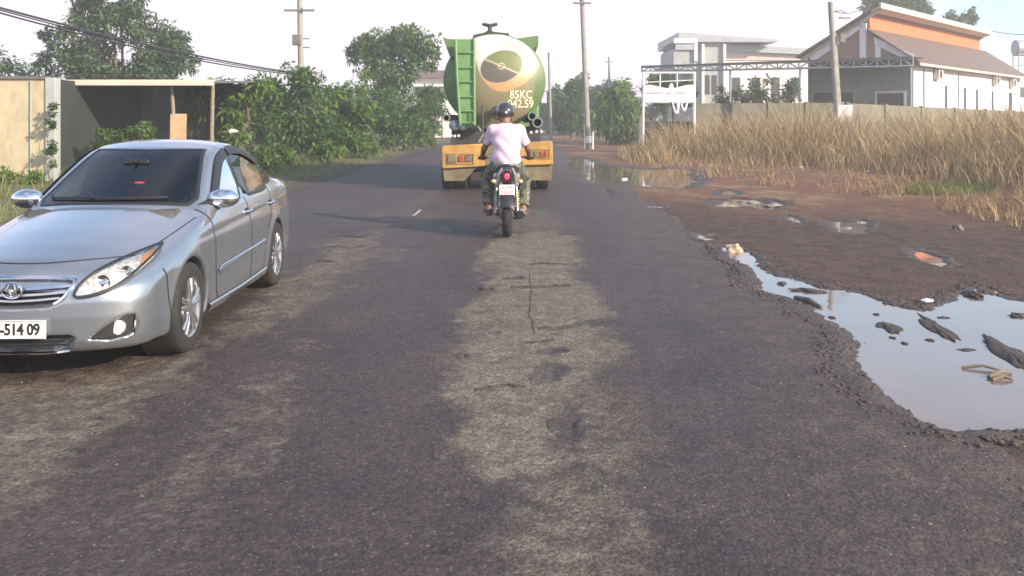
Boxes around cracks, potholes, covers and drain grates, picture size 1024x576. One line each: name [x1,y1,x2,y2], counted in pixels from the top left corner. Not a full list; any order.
pothole [696,197,794,210]
pothole [537,346,575,356]
pothole [709,243,1024,445]
pothole [815,219,883,235]
crack [471,262,580,344]
pothole [775,213,810,223]
pothole [526,362,576,384]
pothole [545,414,594,441]
